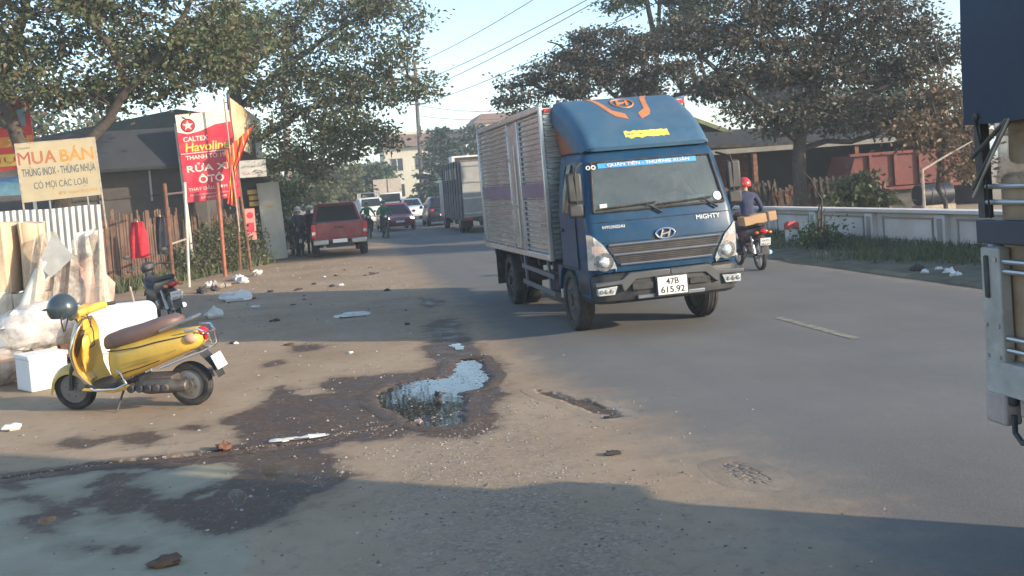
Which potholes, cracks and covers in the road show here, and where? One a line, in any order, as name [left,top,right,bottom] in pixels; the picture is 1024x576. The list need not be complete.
pothole [521,386,640,421]
pothole [358,355,507,432]
